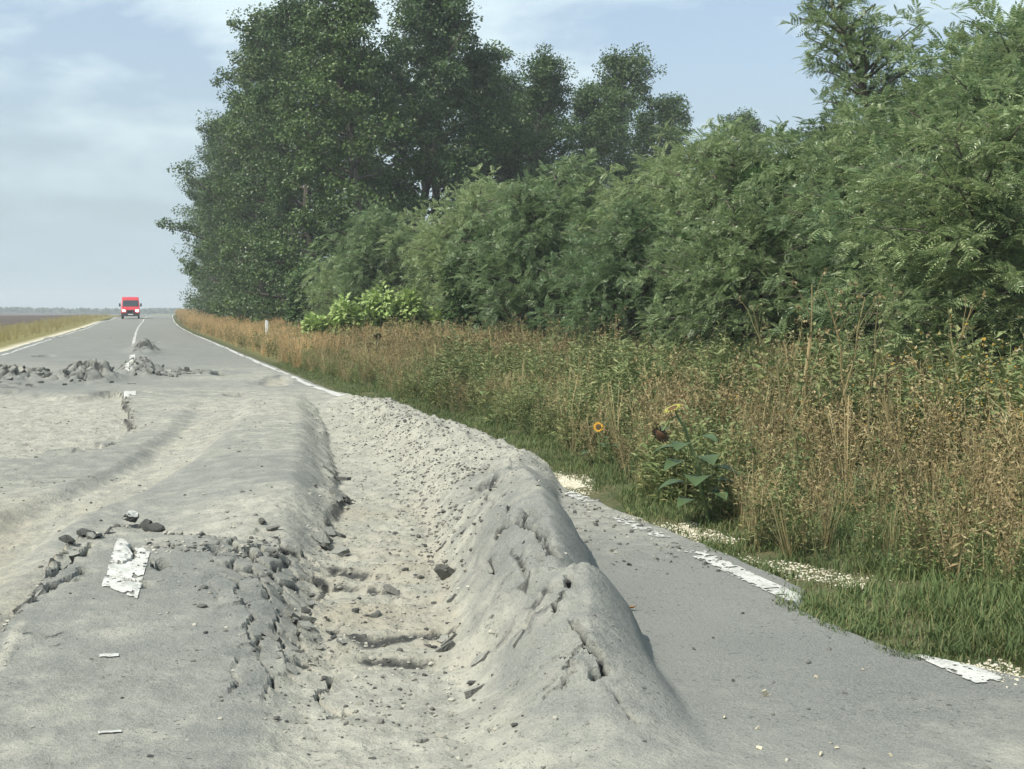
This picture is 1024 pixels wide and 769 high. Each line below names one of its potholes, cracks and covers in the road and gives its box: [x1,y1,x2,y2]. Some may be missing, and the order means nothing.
crack [33,528,354,720]
